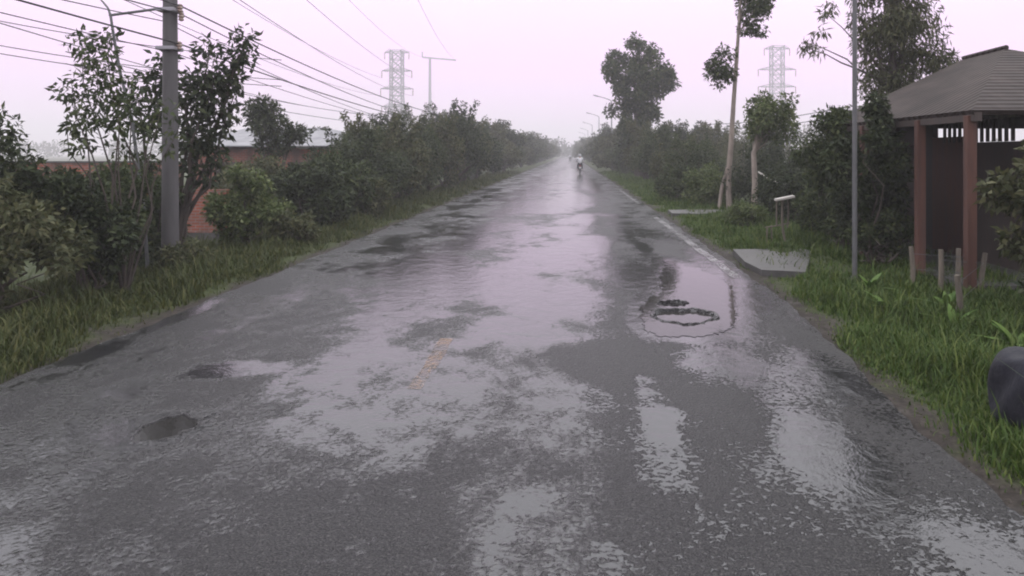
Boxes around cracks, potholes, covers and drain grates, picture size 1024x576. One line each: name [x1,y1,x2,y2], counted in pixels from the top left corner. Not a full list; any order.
pothole [128,413,202,444]
pothole [650,307,721,325]
